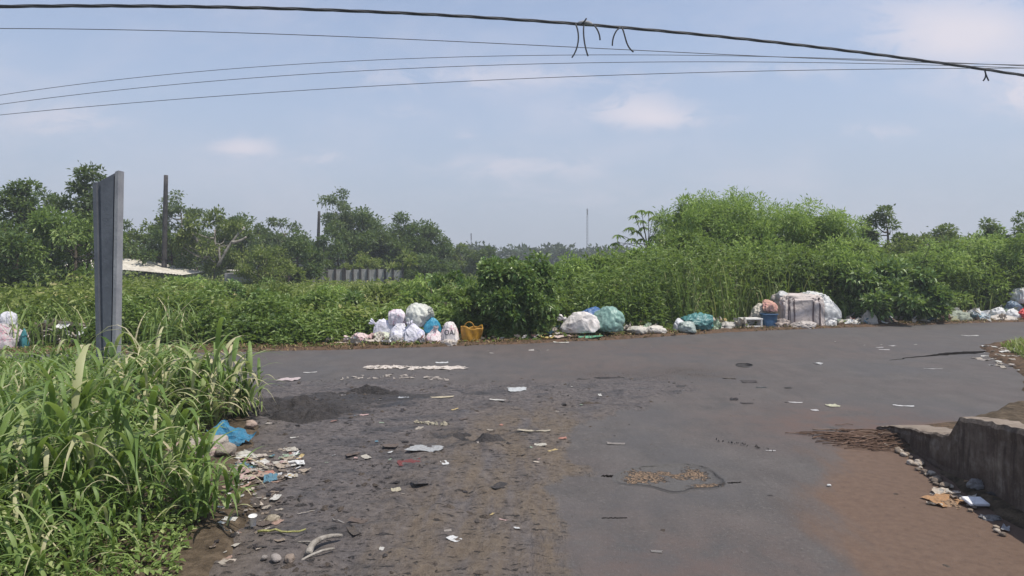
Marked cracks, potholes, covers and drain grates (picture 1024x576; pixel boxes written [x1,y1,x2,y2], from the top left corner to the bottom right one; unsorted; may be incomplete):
crack [894,351,985,360]
pothole [611,463,727,494]
